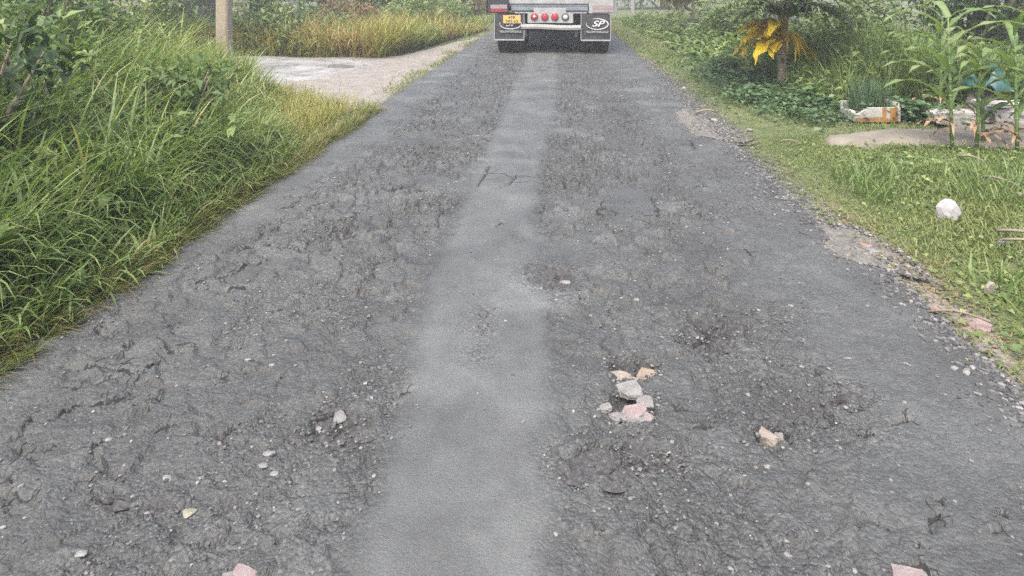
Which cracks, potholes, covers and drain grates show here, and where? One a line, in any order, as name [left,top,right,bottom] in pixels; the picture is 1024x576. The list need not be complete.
pothole [674,310,739,365]
crack [187,190,373,296]
crack [478,165,530,187]
crack [852,408,920,439]
crack [910,497,954,576]
pothole [603,391,661,423]
crack [1,324,200,506]
pothole [605,352,663,382]
pothole [523,259,585,291]
crack [552,180,617,216]
